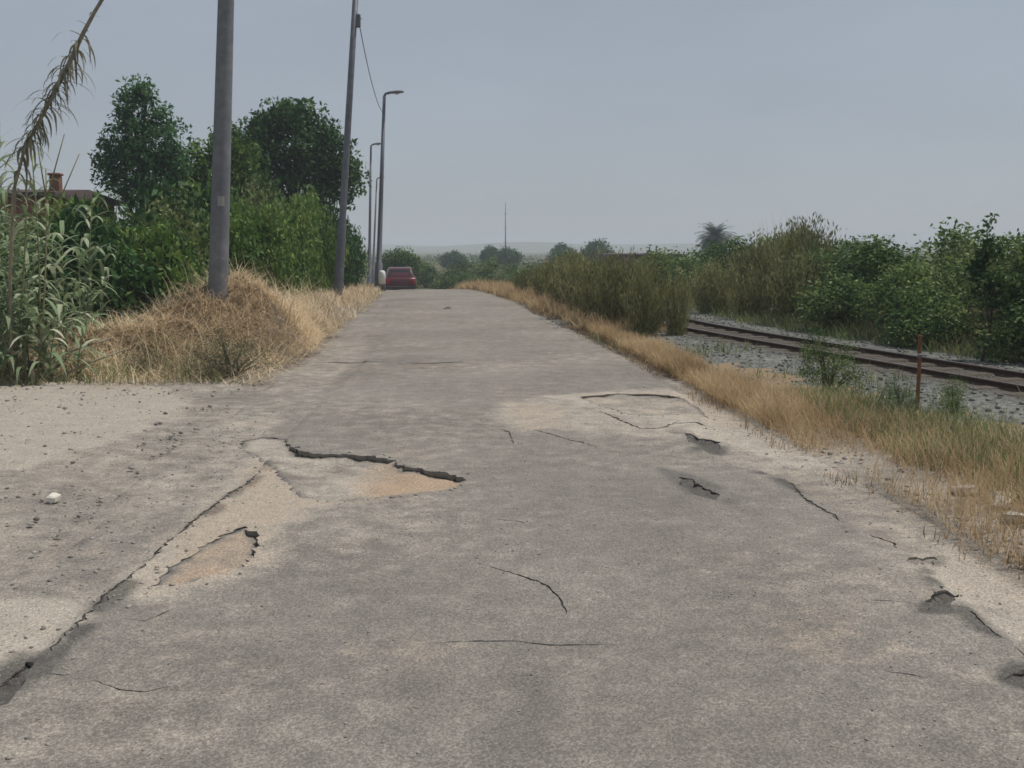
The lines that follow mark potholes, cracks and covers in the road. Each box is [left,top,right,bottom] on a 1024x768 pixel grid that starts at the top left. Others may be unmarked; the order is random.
pothole [679,476,720,500]
crack [492,567,567,613]
pothole [684,433,721,454]
pothole [925,590,959,610]
crack [56,672,168,692]
crack [970,611,1024,655]
crack [50,469,262,650]
pothole [240,437,466,503]
pothole [149,526,260,587]
crack [599,411,705,429]
crack [708,457,897,548]
